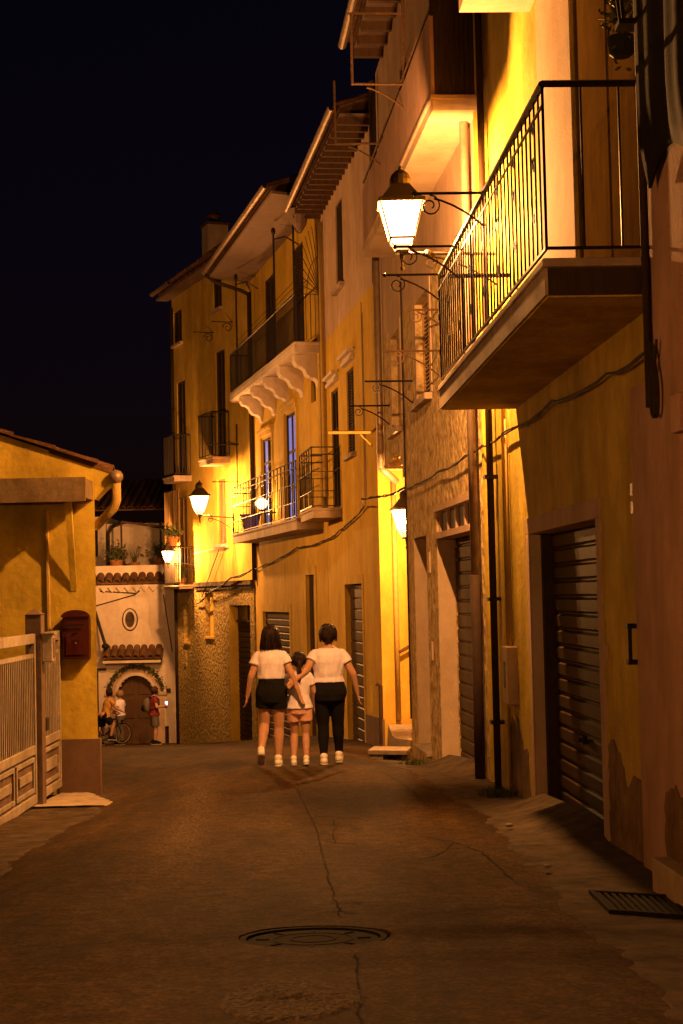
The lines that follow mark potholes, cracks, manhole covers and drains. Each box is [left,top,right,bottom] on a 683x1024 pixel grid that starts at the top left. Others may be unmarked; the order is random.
crack [382,772,527,880]
manhole cover [239,926,387,948]
drain grate [588,889,683,919]
